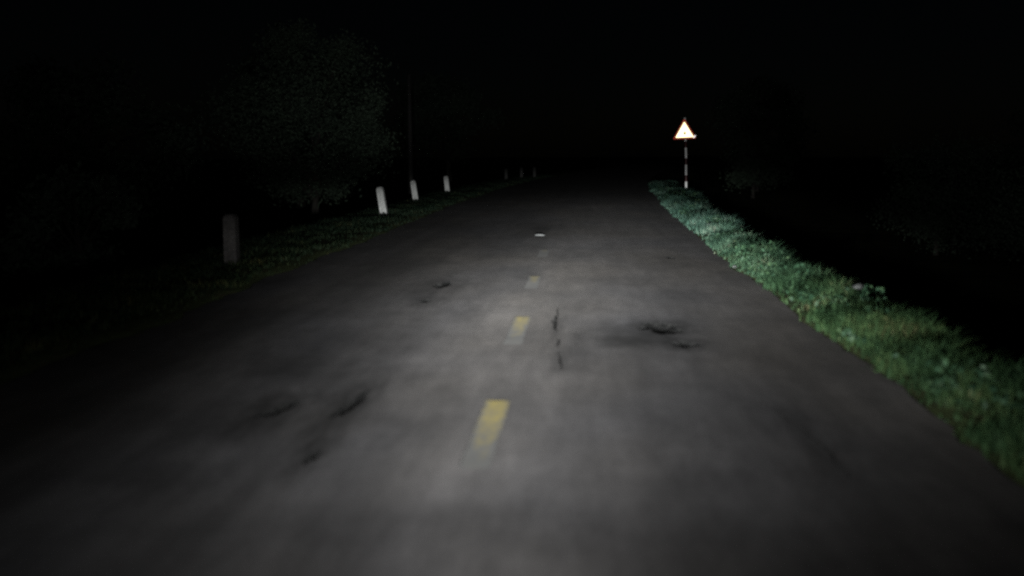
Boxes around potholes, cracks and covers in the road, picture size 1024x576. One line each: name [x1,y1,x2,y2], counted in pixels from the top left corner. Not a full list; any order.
pothole [250,400,301,419]
pothole [302,450,322,466]
pothole [670,340,702,348]
pothole [329,389,371,418]
crack [530,306,578,371]
pothole [637,322,685,335]
